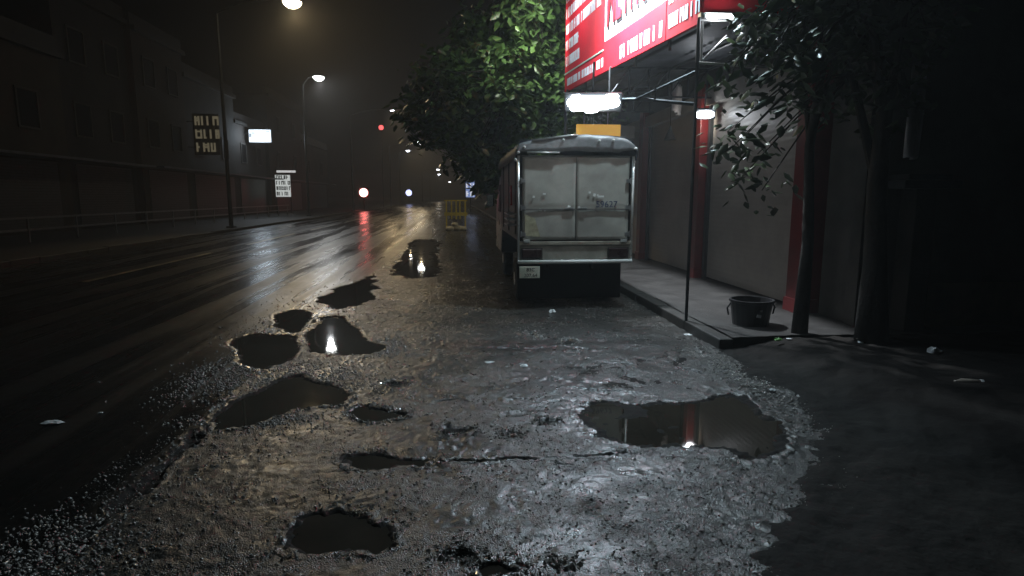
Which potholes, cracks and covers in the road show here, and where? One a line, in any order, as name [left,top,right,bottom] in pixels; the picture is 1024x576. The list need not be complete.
pothole [425,539,489,566]
pothole [322,447,450,475]
pothole [340,401,416,426]
pothole [223,332,309,372]
pothole [264,498,409,561]
crack [425,448,649,468]
pothole [296,314,390,356]
pothole [194,371,360,436]
